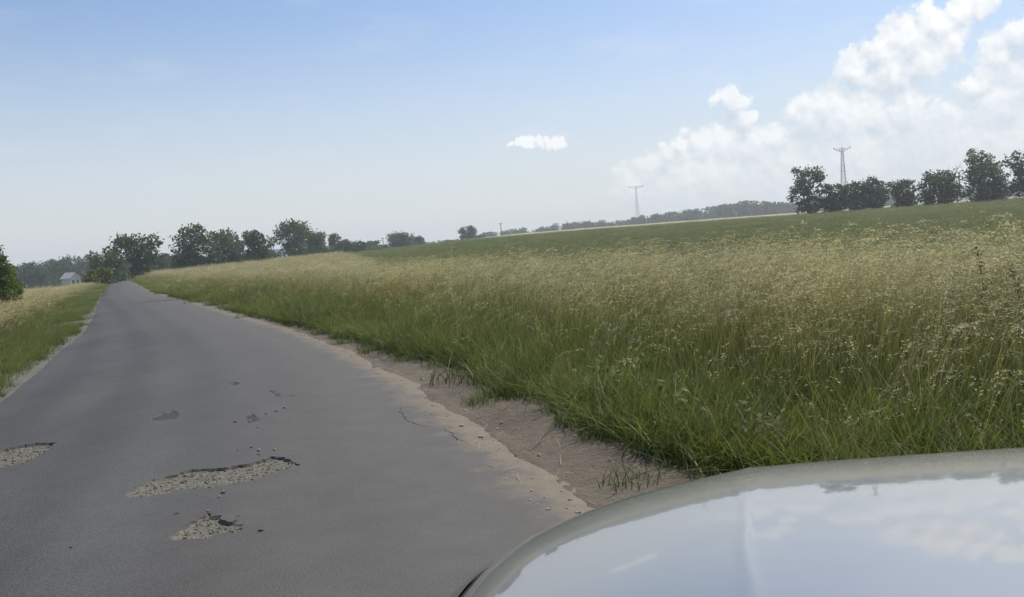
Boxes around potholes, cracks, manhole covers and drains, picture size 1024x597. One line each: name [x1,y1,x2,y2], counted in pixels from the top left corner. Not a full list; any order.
pothole [122,456,300,498]
pothole [166,513,243,540]
pothole [0,442,57,468]
pothole [150,410,181,421]
